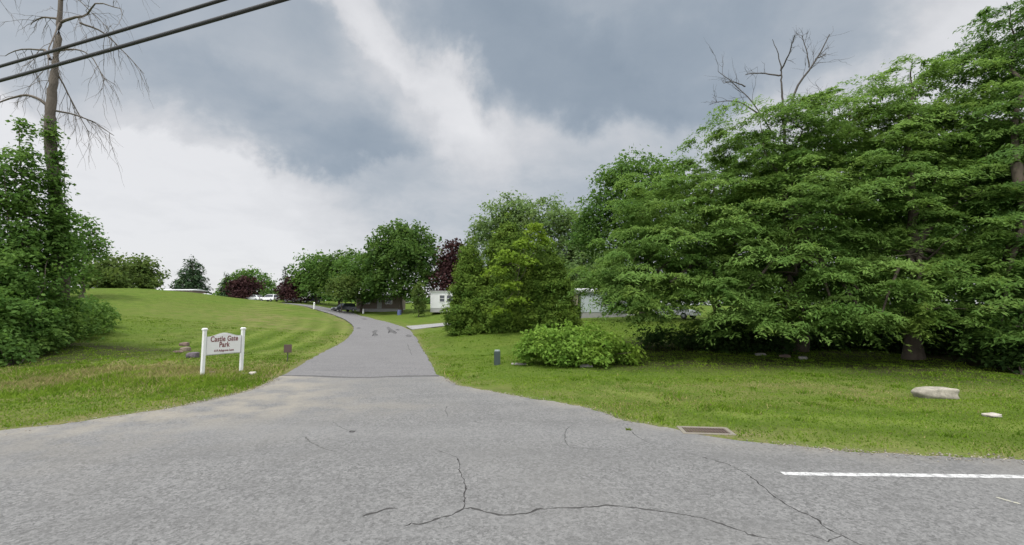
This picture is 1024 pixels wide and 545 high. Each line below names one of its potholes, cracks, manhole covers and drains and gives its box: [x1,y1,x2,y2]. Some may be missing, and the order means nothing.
crack [694,454,861,545]
crack [363,451,782,540]
drain grate [676,426,736,435]
